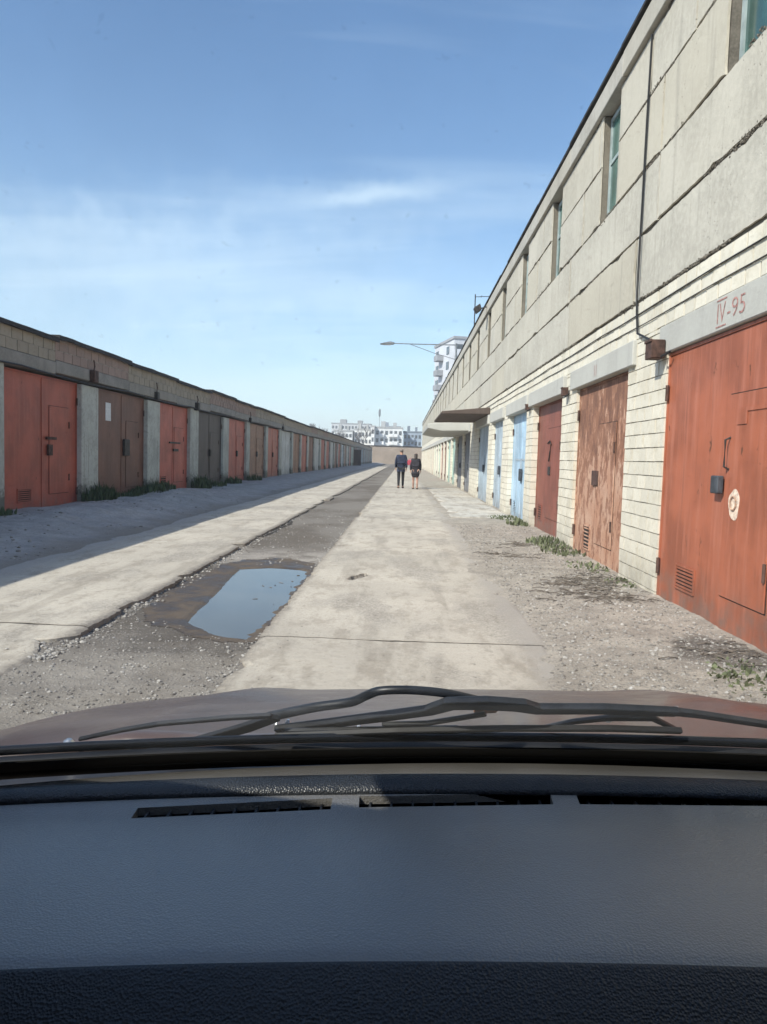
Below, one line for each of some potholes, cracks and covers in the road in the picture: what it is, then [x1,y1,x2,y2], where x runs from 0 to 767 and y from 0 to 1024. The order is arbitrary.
pothole [141,558,316,643]
